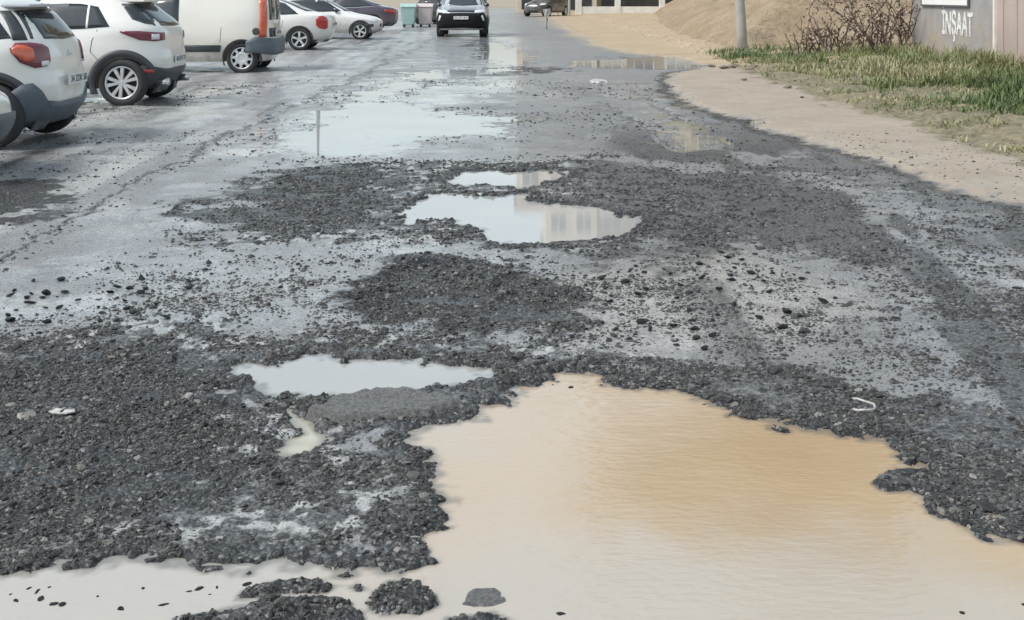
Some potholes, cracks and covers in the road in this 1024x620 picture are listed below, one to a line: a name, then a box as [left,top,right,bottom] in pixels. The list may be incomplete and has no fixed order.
pothole [322,251,601,342]
pothole [202,347,515,403]
pothole [243,80,558,159]
pothole [377,191,655,248]
pothole [440,168,584,190]
pothole [0,358,1024,620]
